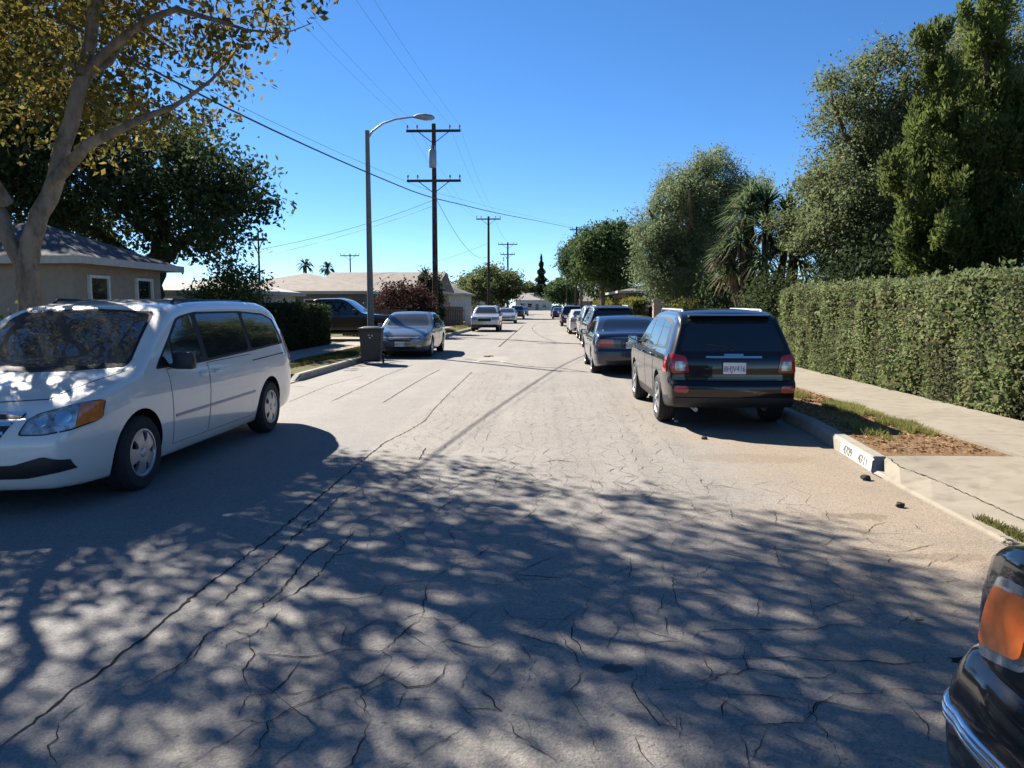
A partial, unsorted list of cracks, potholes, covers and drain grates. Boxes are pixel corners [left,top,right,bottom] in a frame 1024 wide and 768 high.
crack [216,465,510,612]
crack [114,560,942,768]
crack [387,330,972,649]
crack [47,704,83,764]
